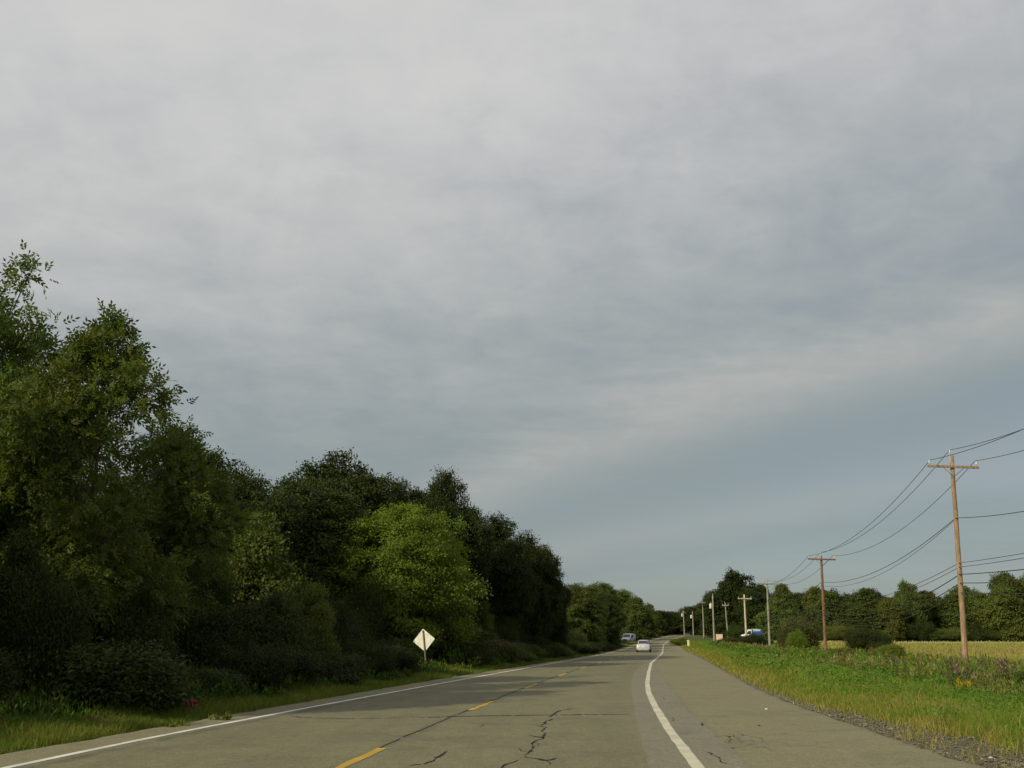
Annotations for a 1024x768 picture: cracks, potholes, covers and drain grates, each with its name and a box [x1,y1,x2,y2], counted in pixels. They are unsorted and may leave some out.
crack [701,723,774,763]
crack [290,706,628,768]
